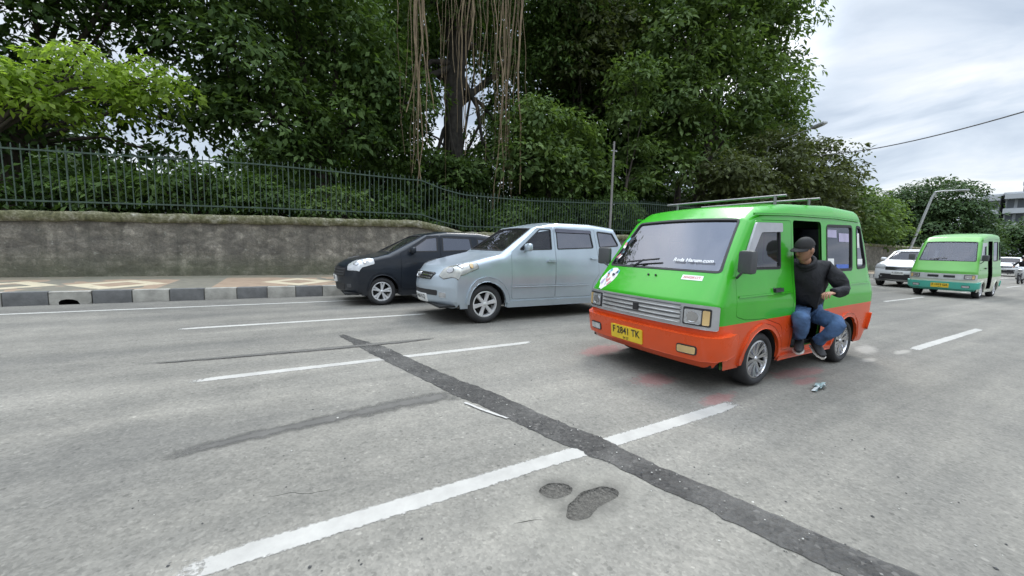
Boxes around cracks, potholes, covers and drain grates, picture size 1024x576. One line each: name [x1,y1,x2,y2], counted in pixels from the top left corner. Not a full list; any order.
pothole [539,483,573,499]
pothole [566,486,619,521]
